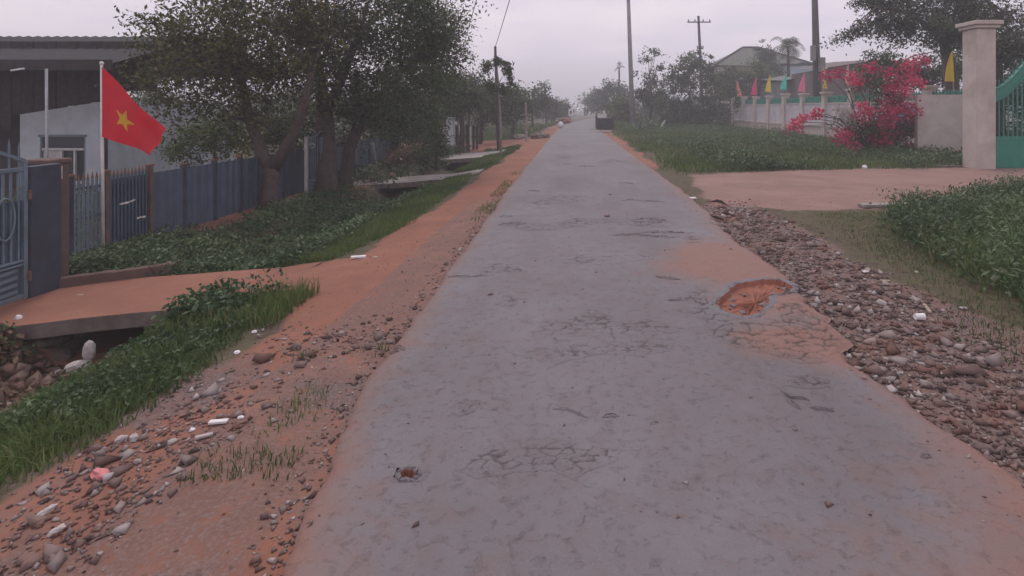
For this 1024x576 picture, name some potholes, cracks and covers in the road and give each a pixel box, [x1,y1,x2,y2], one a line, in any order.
pothole [394,465,422,483]
pothole [709,277,800,319]
crack [454,407,622,481]
crack [448,182,854,412]
